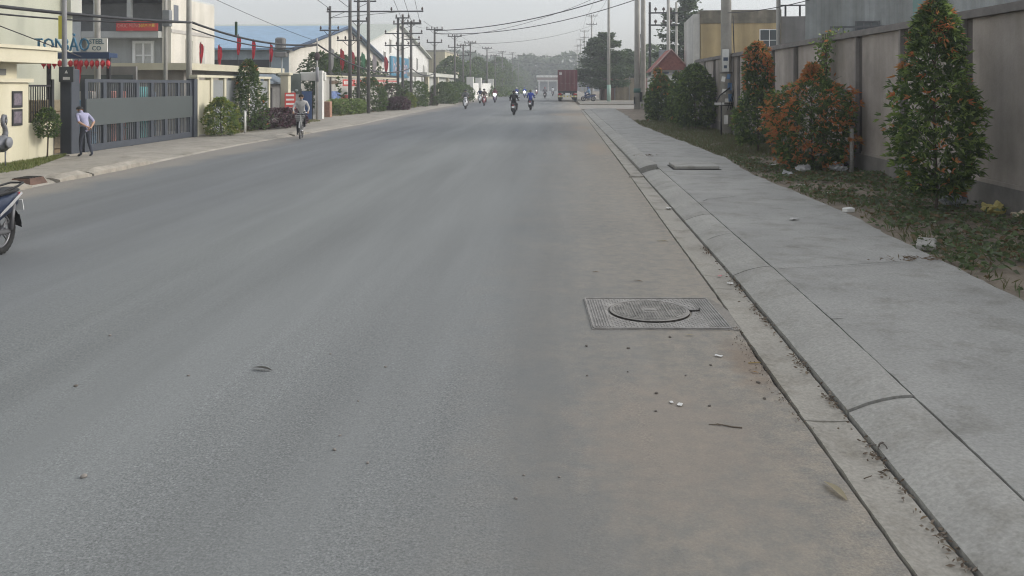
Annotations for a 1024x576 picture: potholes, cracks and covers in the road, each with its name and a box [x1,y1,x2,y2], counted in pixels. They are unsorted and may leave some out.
manhole cover [583,297,741,330]
